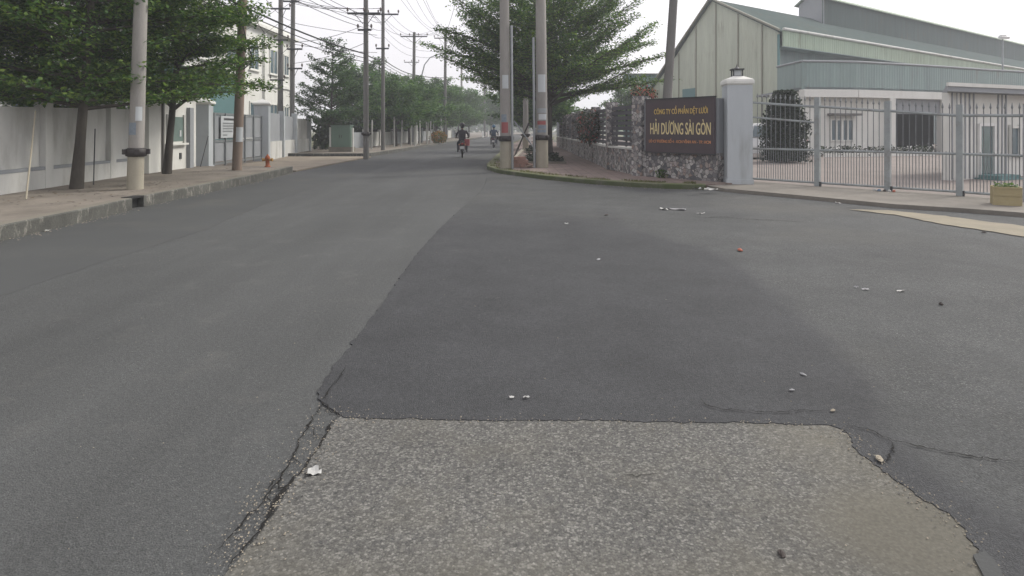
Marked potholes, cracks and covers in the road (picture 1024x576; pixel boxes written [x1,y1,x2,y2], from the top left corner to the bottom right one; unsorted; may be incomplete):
crack [700,397,821,412]
drain grate [121,195,144,208]
crack [211,369,345,565]
crack [848,425,1012,461]
